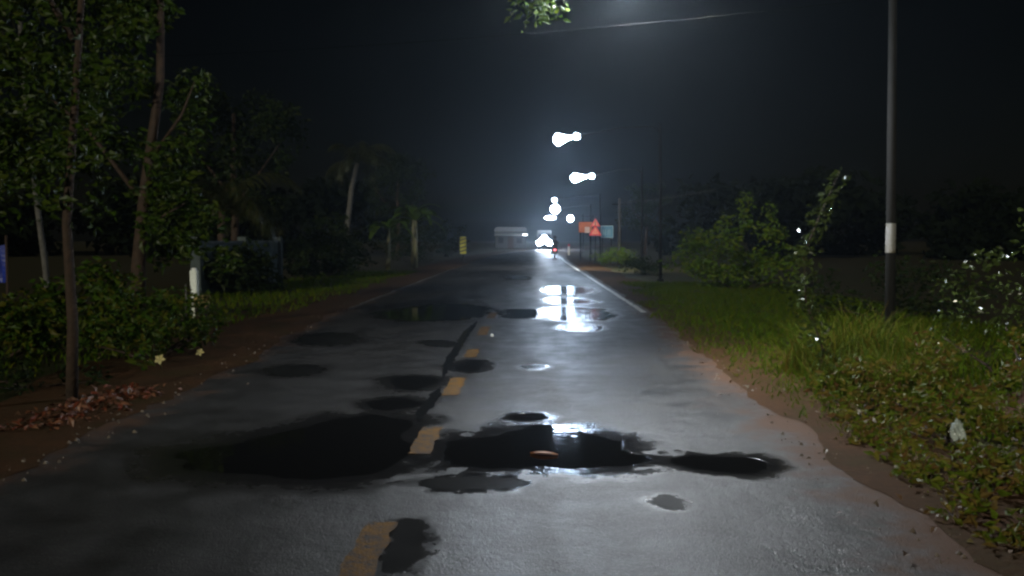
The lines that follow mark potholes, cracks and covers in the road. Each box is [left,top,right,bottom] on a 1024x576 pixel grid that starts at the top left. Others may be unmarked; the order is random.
pothole [670,454,770,474]
pothole [453,360,484,372]
pothole [441,424,654,470]
pothole [382,520,423,573]
pothole [270,365,322,376]
pothole [172,414,413,480]
pothole [389,376,439,390]
pothole [509,413,548,421]
pothole [366,397,424,410]
pothole [653,496,683,509]
pothole [297,333,358,345]
pothole [423,476,524,489]
